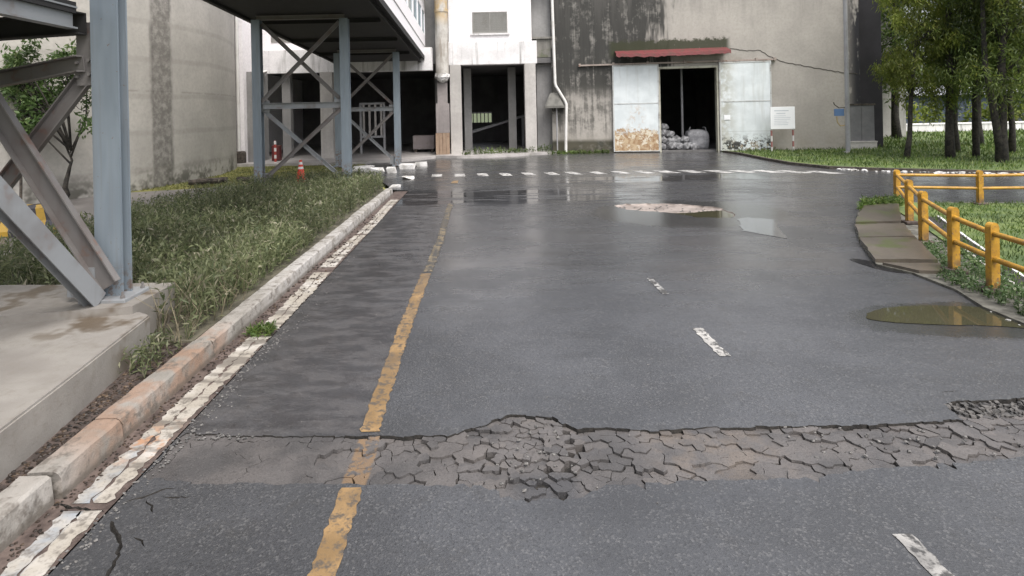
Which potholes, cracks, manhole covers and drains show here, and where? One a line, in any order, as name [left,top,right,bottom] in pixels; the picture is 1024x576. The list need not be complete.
crack [125,391,1024,513]
